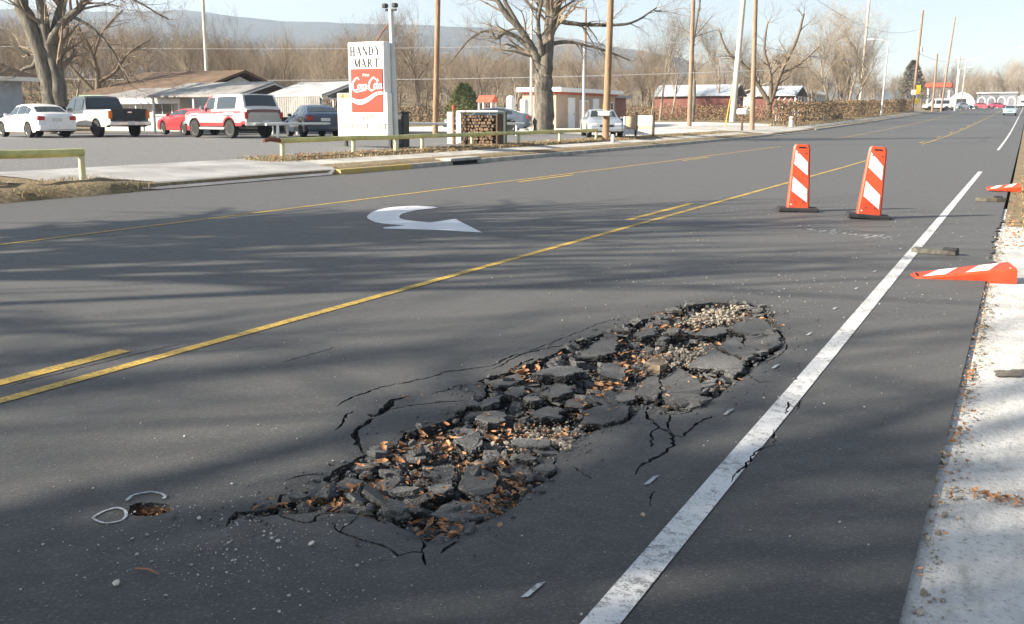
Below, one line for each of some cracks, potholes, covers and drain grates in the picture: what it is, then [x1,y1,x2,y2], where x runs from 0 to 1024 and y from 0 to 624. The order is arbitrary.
pothole [226,302,784,543]
drain grate [435,156,481,165]
pothole [128,502,172,516]
crack [732,401,801,481]
crack [635,406,712,506]
